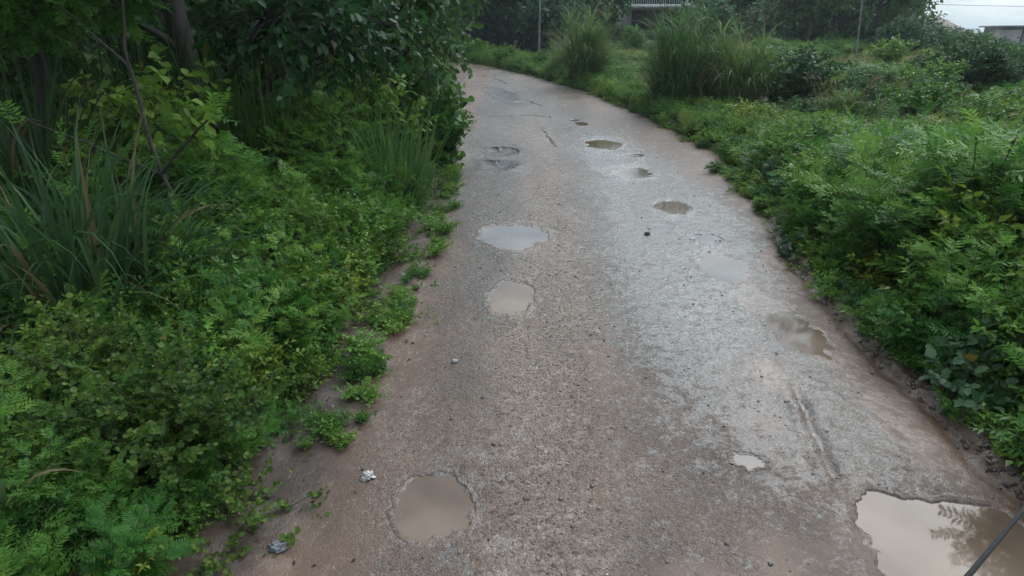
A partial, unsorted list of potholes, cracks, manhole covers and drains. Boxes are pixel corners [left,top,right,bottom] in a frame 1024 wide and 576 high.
pothole [581,139,626,151]
pothole [842,483,1024,576]
pothole [481,277,540,319]
pothole [386,468,481,549]
pothole [605,166,662,180]
pothole [472,222,554,254]
crack [486,78,561,147]
pothole [725,450,772,473]
pothole [650,200,695,216]
pothole [754,305,841,364]
pothole [689,251,759,290]
pothole [475,160,521,172]
